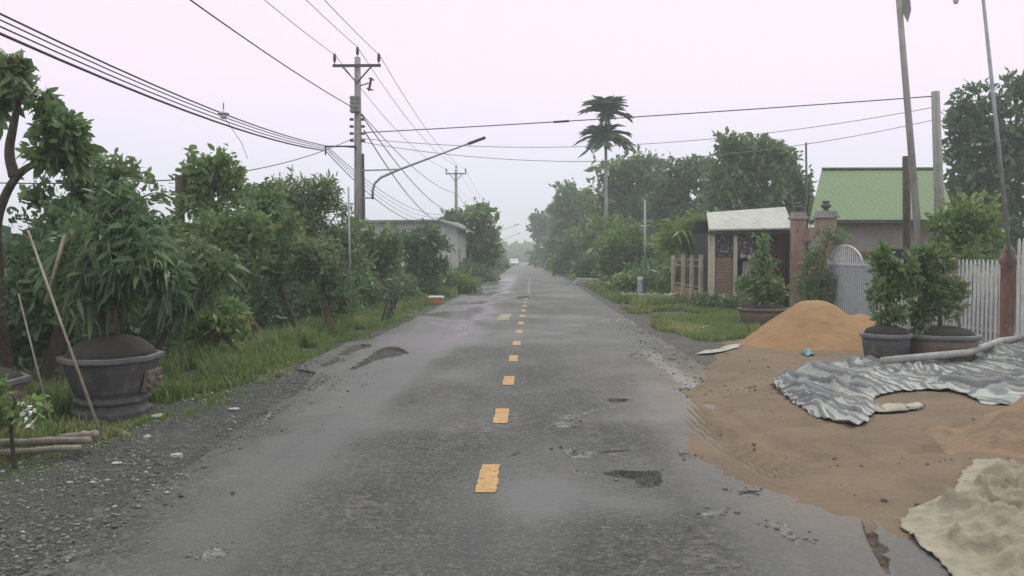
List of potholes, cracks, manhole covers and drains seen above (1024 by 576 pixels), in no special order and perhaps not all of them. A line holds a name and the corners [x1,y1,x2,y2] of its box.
pothole [562,448,598,458]
pothole [350,346,409,370]
pothole [599,470,664,488]
pothole [339,344,372,355]
